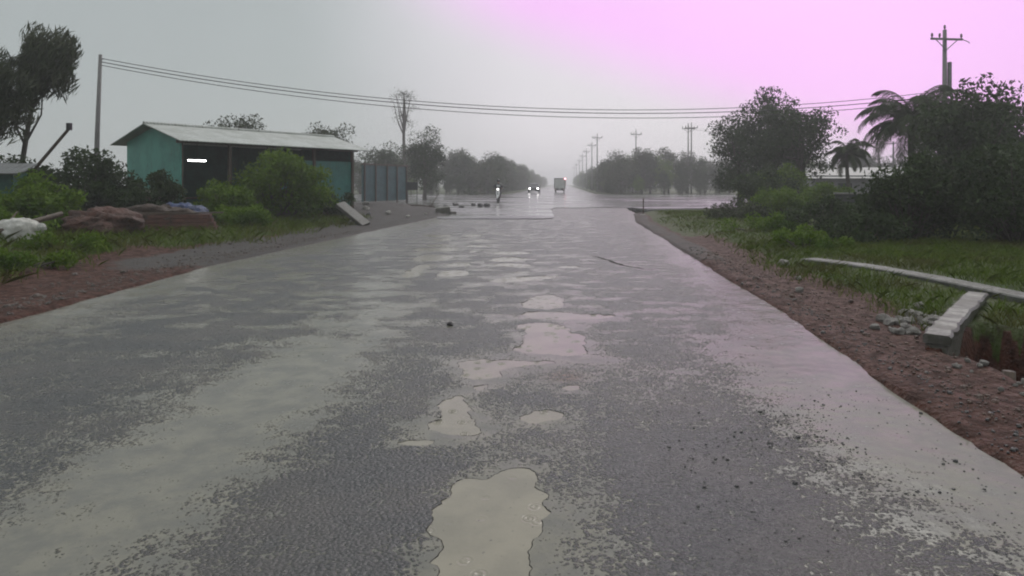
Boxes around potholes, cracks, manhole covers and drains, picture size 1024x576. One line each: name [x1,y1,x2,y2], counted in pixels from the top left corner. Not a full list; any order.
pothole [427,395,482,436]
pothole [520,295,565,310]
pothole [457,359,555,380]
crack [583,255,654,270]
pothole [512,322,588,356]
pothole [426,467,551,576]
pothole [519,409,565,424]
